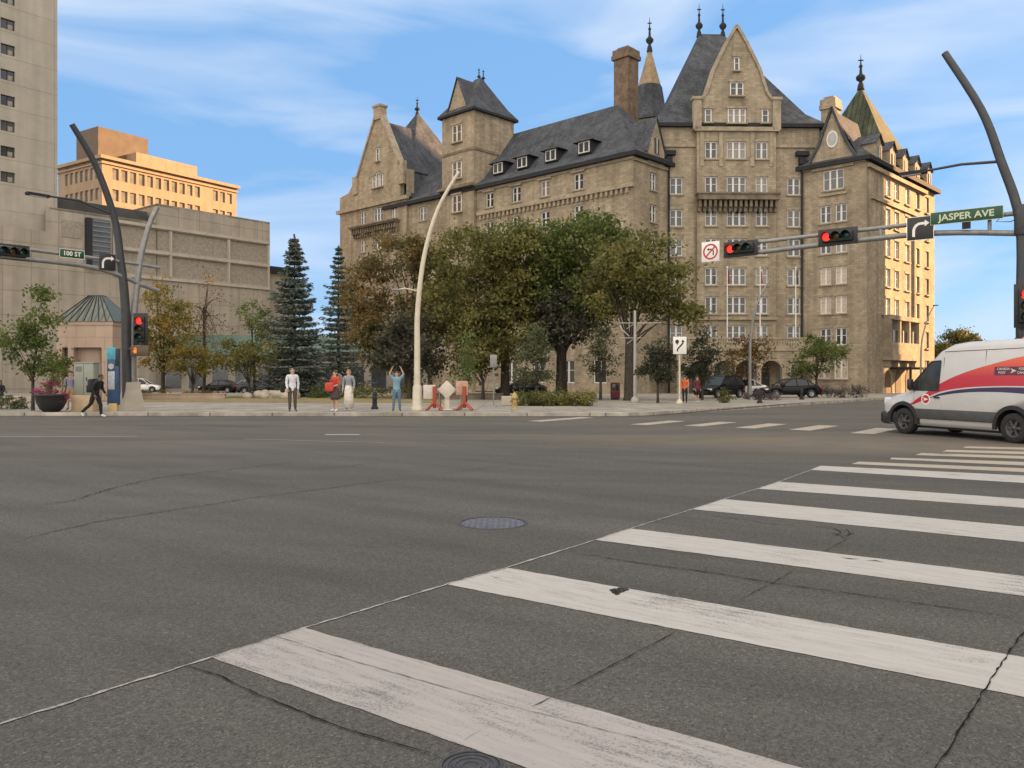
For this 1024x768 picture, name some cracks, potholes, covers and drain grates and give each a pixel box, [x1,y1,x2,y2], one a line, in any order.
manhole cover [439,750,503,768]
manhole cover [457,517,528,530]
crack [935,632,1024,768]
crack [185,665,435,755]
crack [1,462,504,542]
